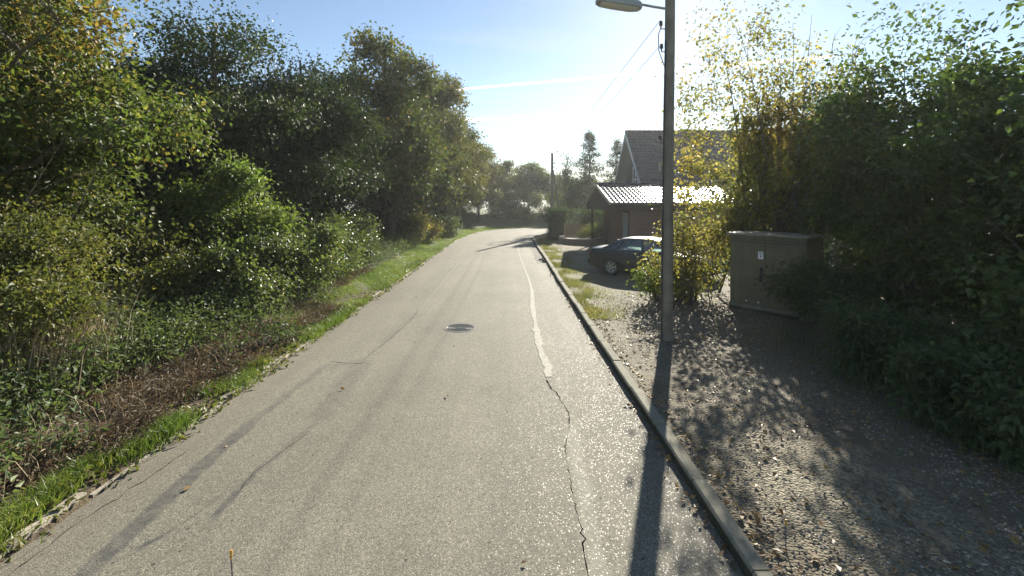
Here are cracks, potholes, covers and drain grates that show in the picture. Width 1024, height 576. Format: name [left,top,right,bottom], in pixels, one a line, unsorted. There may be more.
crack [236,433,308,494]
manhole cover [444,323,476,332]
crack [546,380,588,574]
crack [8,450,188,576]
